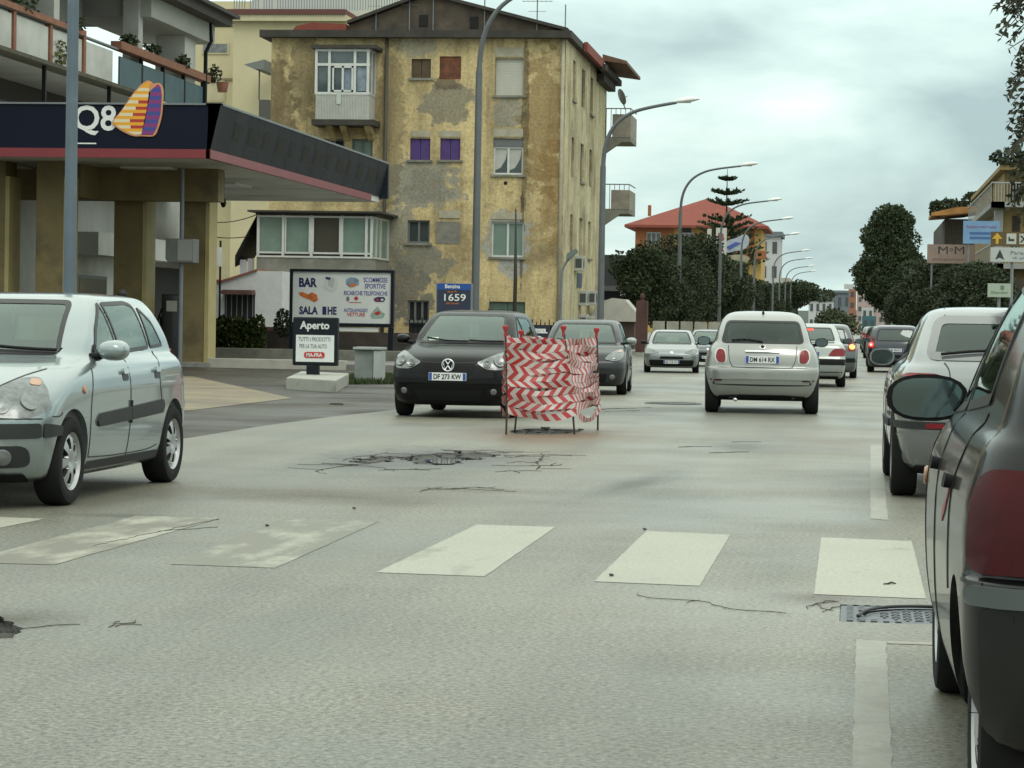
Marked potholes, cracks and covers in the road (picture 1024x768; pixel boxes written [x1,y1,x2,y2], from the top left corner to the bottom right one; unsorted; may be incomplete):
crack [297,450,586,492]
crack [806,600,842,612]
crack [16,620,142,630]
pothole [348,455,397,463]
pothole [0,616,22,638]
crack [637,592,787,614]
pothole [397,450,500,465]
crack [93,518,219,546]
